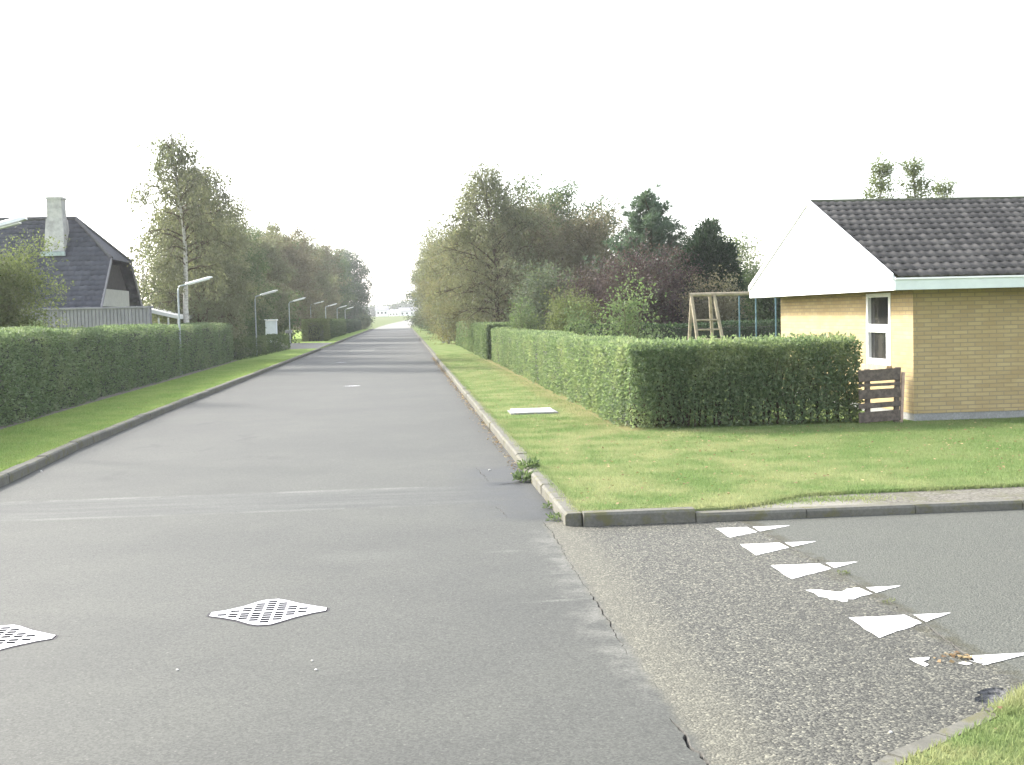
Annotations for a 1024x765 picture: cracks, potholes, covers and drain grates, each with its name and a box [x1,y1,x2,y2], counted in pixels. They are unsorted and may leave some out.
pothole [975,687,1008,704]
